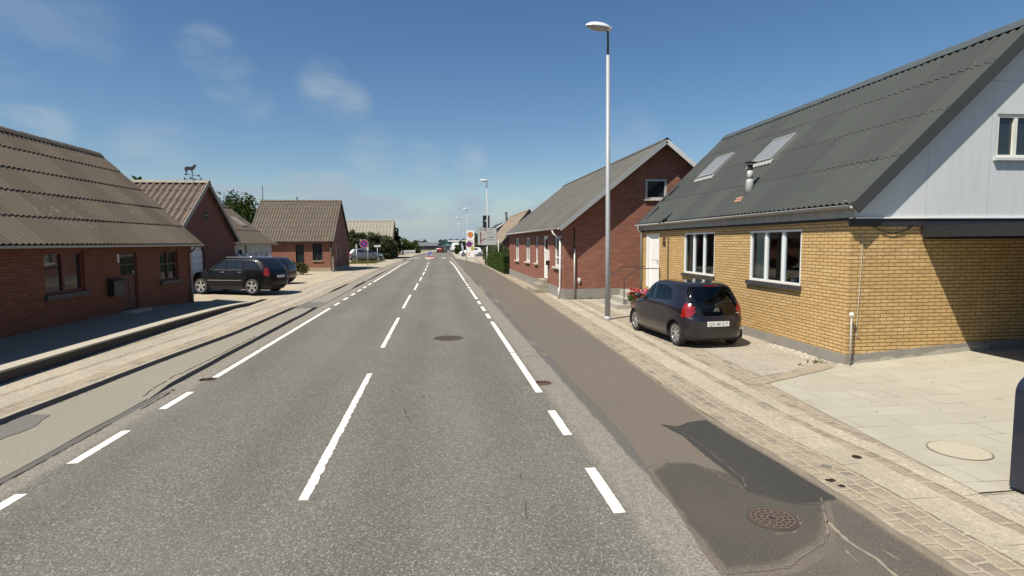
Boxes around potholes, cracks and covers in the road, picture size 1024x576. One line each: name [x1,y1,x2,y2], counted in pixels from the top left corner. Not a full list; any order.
manhole cover [746,507,799,531]
crack [821,498,900,576]
